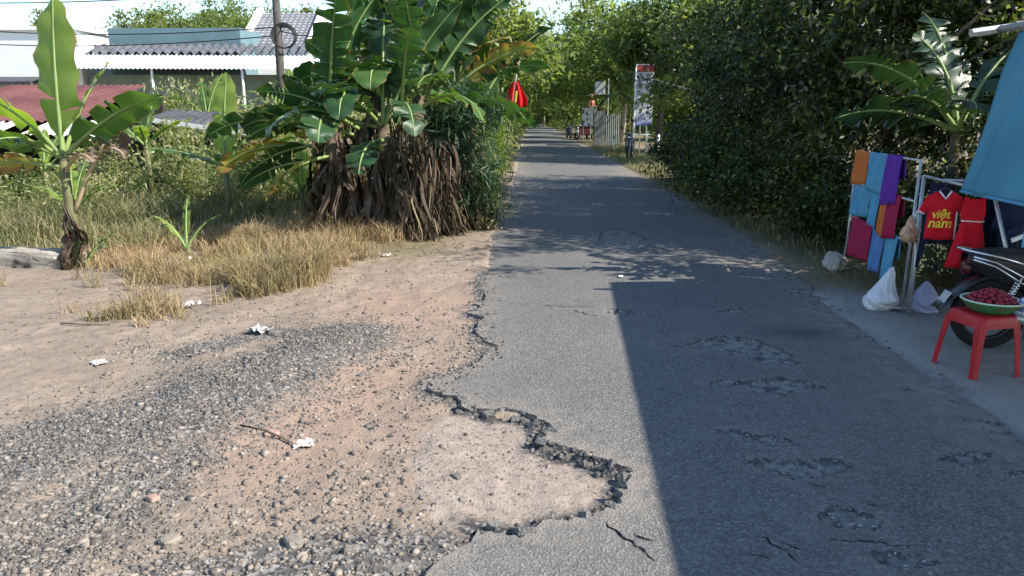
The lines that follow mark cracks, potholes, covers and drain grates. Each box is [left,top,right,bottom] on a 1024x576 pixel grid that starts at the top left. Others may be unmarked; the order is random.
pothole [716,428,802,447]
crack [544,305,597,316]
pothole [686,334,800,366]
pothole [411,400,633,539]
crack [605,521,655,561]
pothole [709,376,827,397]
pothole [870,550,943,570]
pothole [937,451,993,468]
pothole [742,457,854,480]
pothole [817,502,884,531]
crack [748,536,806,562]
